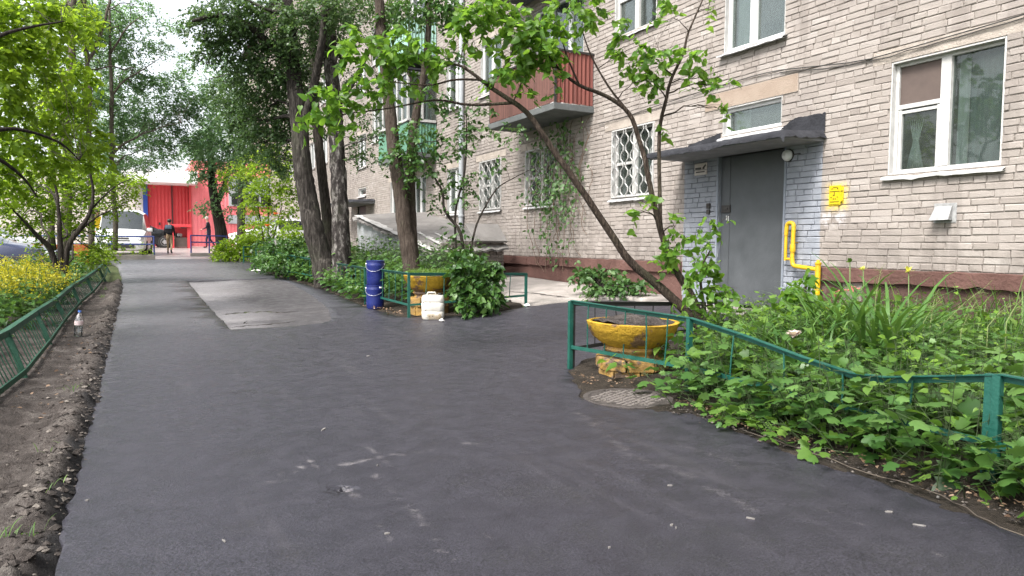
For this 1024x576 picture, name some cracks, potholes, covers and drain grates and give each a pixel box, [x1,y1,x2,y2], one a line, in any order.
manhole cover [583,388,673,410]
crack [231,311,296,327]
pothole [327,486,355,494]
